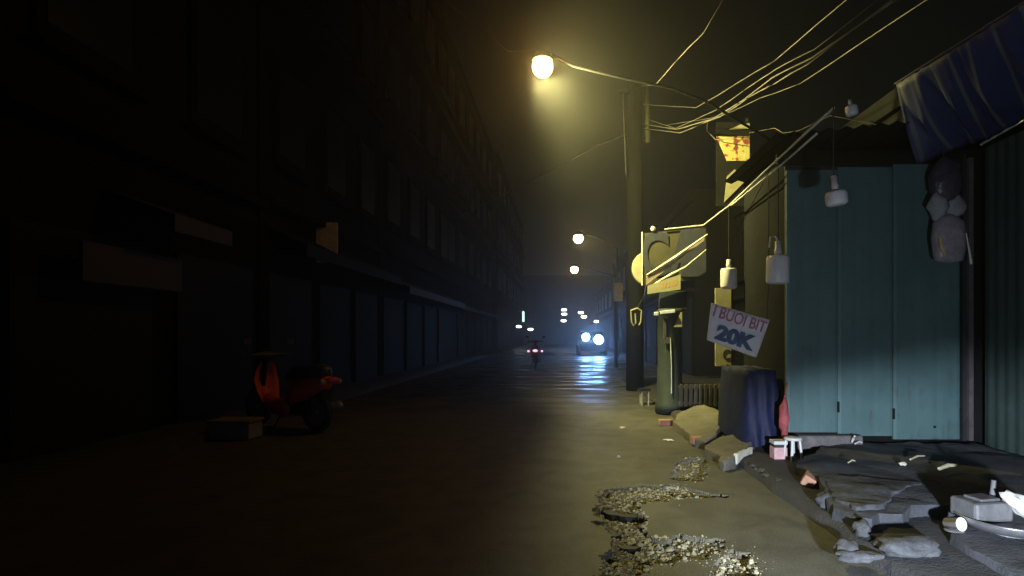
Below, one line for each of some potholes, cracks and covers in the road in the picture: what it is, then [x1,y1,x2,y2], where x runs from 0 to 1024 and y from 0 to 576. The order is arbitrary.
pothole [656,455,710,487]
pothole [568,481,730,576]
